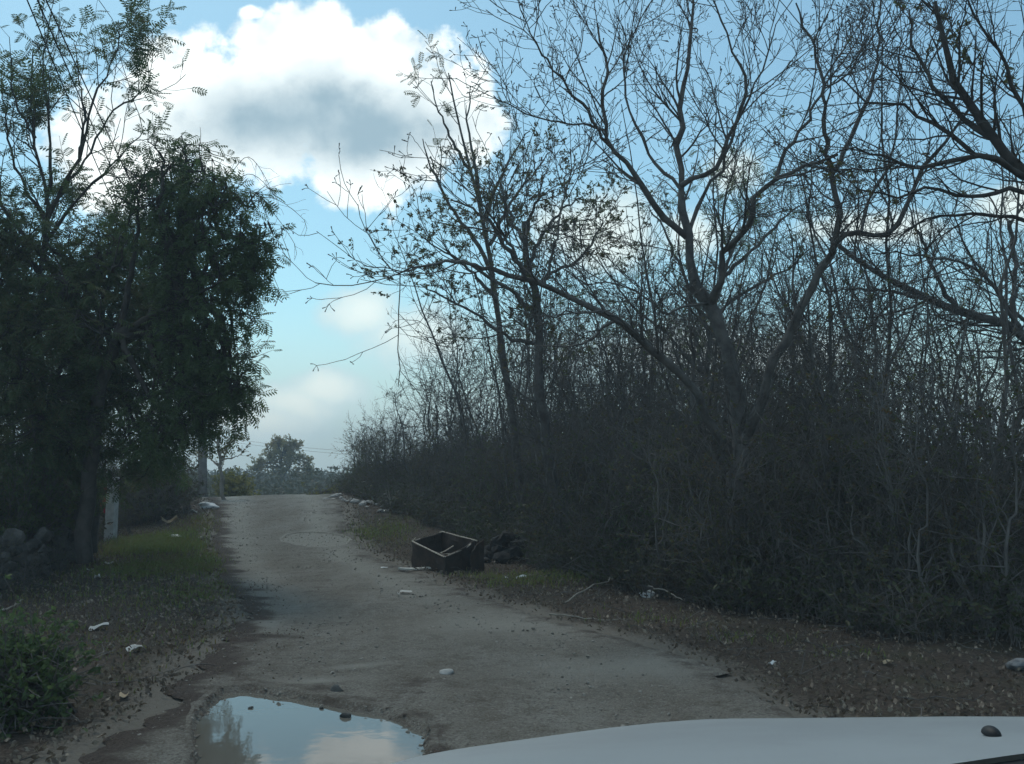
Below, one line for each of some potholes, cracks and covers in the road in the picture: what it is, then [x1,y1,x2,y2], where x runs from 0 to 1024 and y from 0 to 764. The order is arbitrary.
pothole [178,680,449,764]
